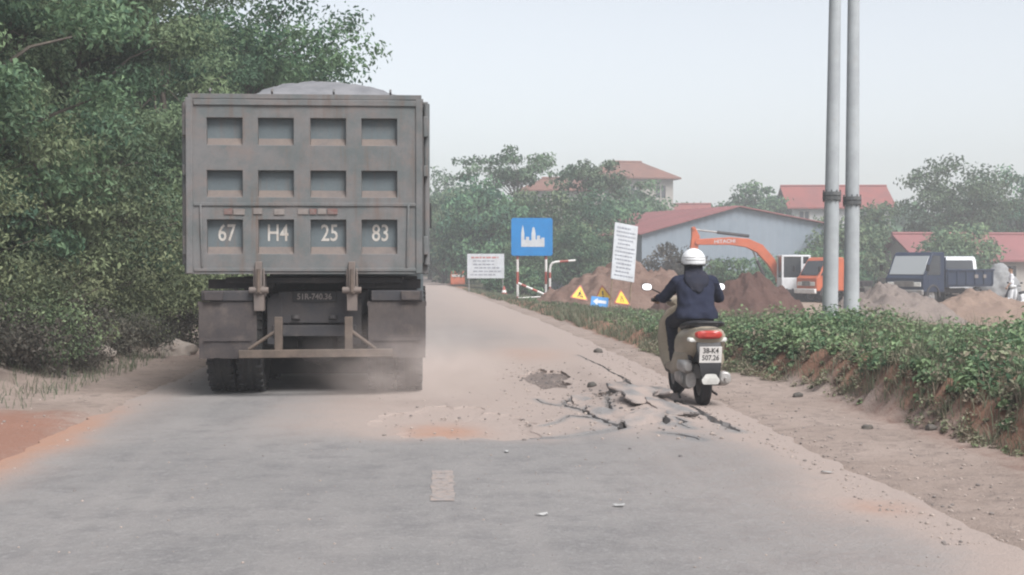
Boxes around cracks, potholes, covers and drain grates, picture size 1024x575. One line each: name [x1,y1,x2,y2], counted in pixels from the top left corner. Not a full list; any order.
pothole [517,369,571,389]
crack [530,355,740,440]
